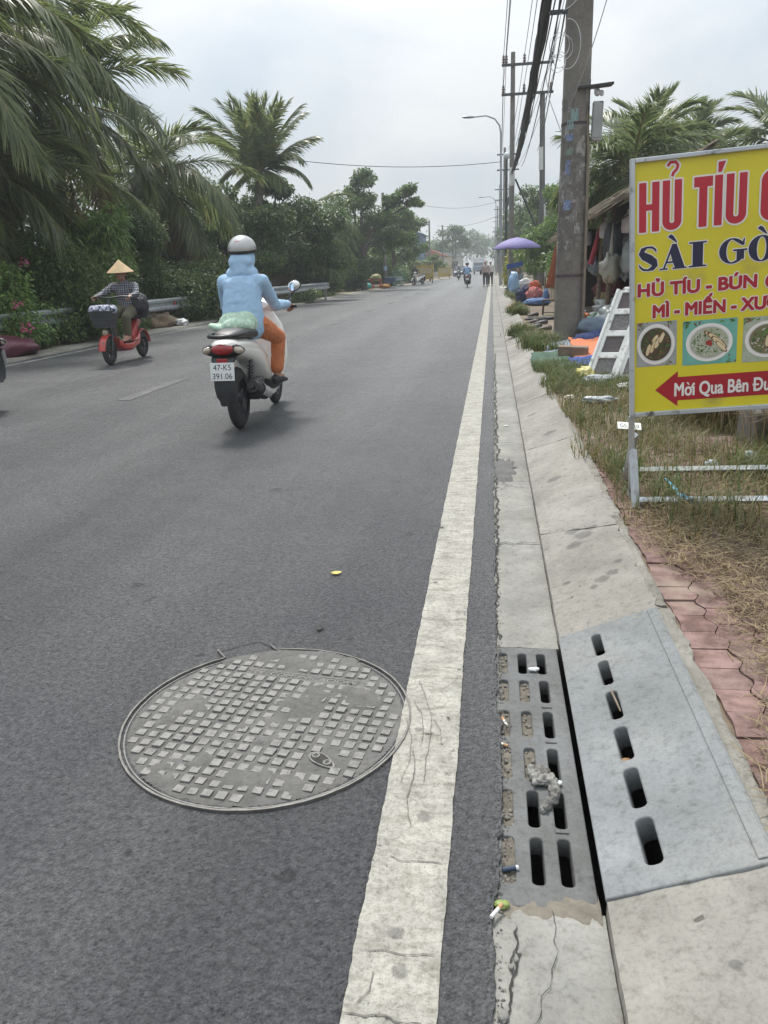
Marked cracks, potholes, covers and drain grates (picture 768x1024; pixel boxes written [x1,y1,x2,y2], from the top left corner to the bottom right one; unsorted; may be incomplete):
crack [536,910,559,1023]
drain grate [494,647,598,907]
crack [506,927,520,1024]
drain grate [559,607,768,903]
manhole cover [118,644,411,813]
crack [401,644,458,824]
